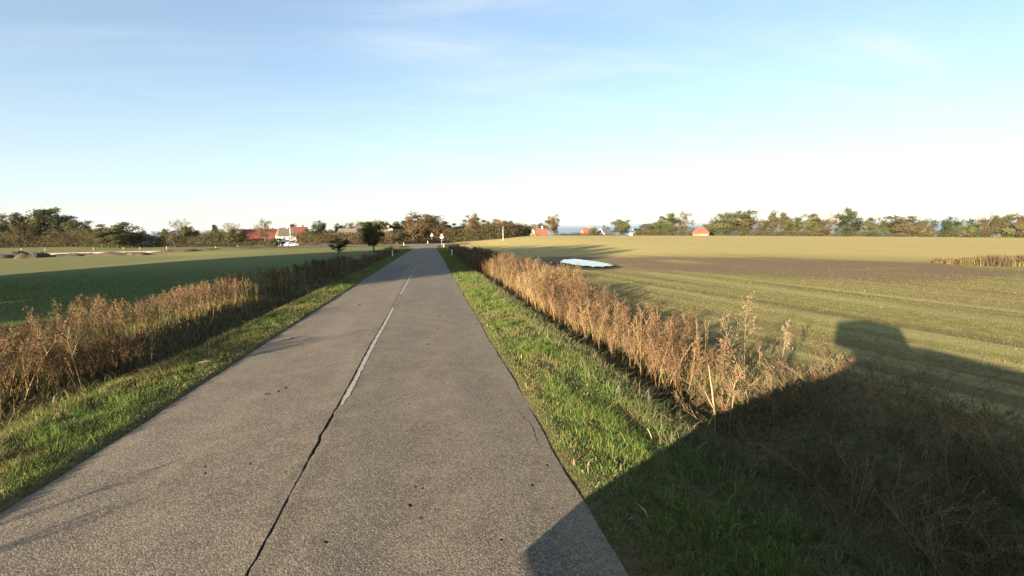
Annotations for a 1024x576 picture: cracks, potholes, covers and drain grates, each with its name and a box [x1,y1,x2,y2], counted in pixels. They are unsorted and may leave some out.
crack [245,263,417,576]
